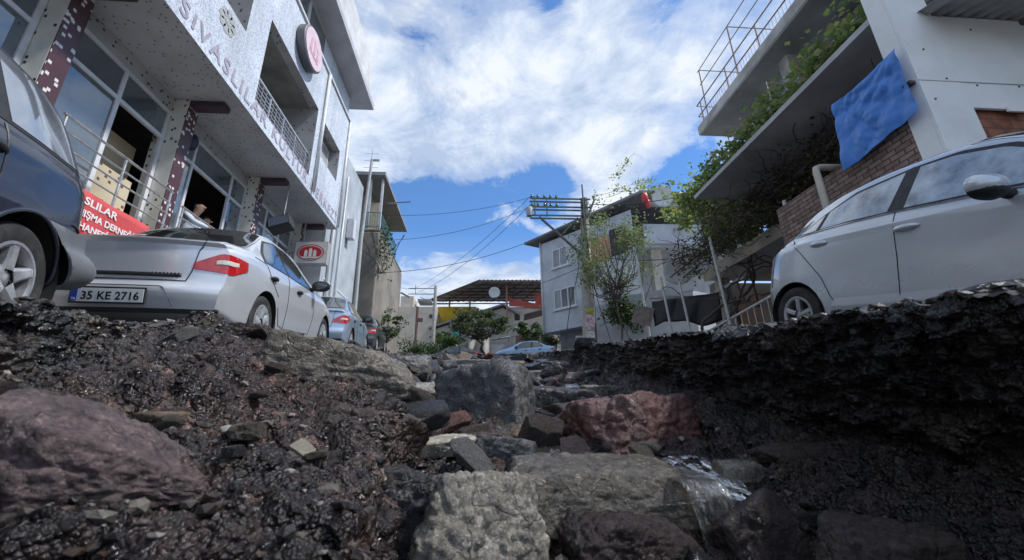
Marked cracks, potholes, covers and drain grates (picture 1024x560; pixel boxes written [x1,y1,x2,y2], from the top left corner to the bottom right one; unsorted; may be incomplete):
pothole [0,292,1024,560]
